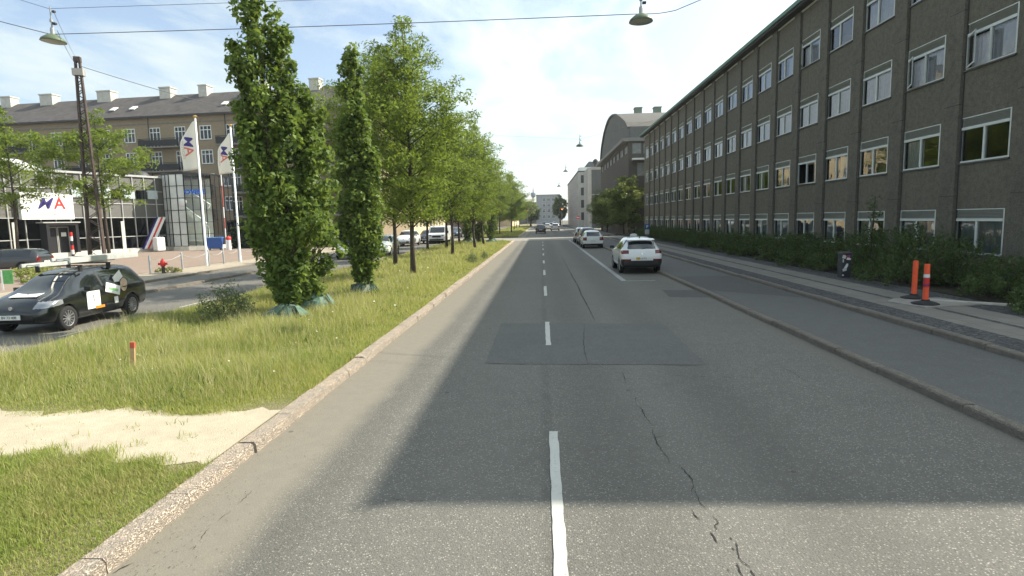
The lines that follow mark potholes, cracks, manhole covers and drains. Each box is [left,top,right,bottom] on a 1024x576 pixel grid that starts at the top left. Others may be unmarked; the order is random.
crack [624,377,755,576]
